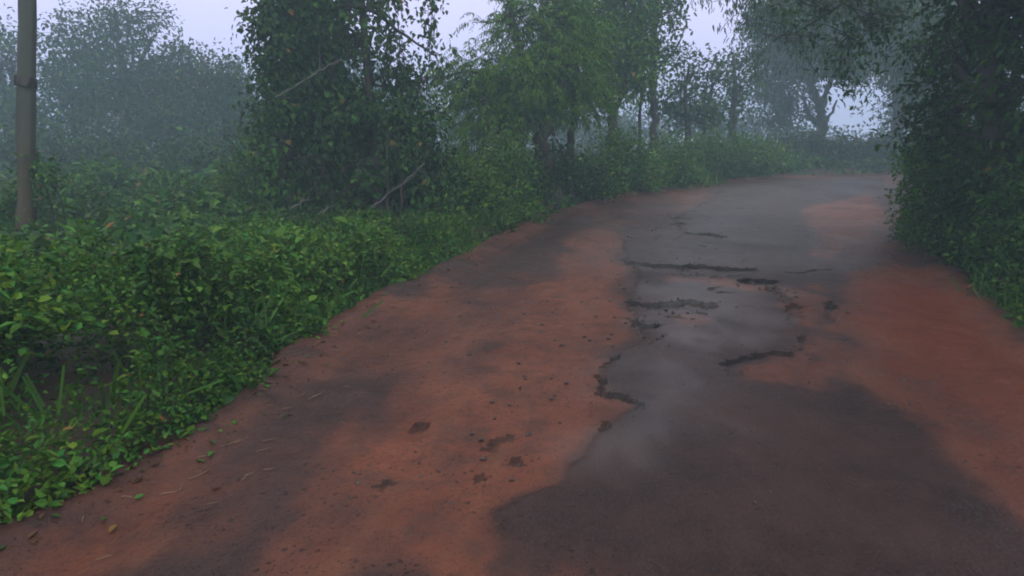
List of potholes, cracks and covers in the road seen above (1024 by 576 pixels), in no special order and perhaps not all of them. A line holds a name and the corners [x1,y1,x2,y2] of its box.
pothole [823,301,839,325]
pothole [406,422,432,443]
pothole [479,433,518,453]
pothole [736,278,778,287]
pothole [719,350,796,377]
pothole [371,479,397,493]
pothole [506,456,528,468]
crack [651,201,713,248]
